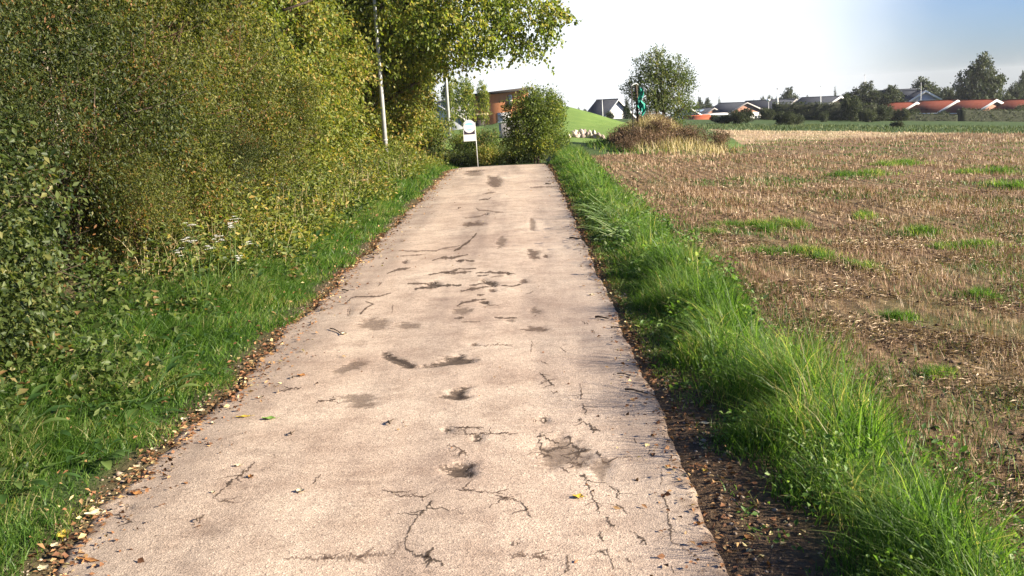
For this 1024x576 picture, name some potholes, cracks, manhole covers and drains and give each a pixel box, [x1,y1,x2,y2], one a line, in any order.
crack [387,233,523,319]
crack [382,488,449,566]
pothole [381,352,415,369]
crack [215,462,255,497]
pothole [441,463,475,478]
crack [529,348,674,569]
pothole [423,355,479,368]
crack [447,426,516,456]
pothole [440,387,469,400]
crack [458,482,537,518]
